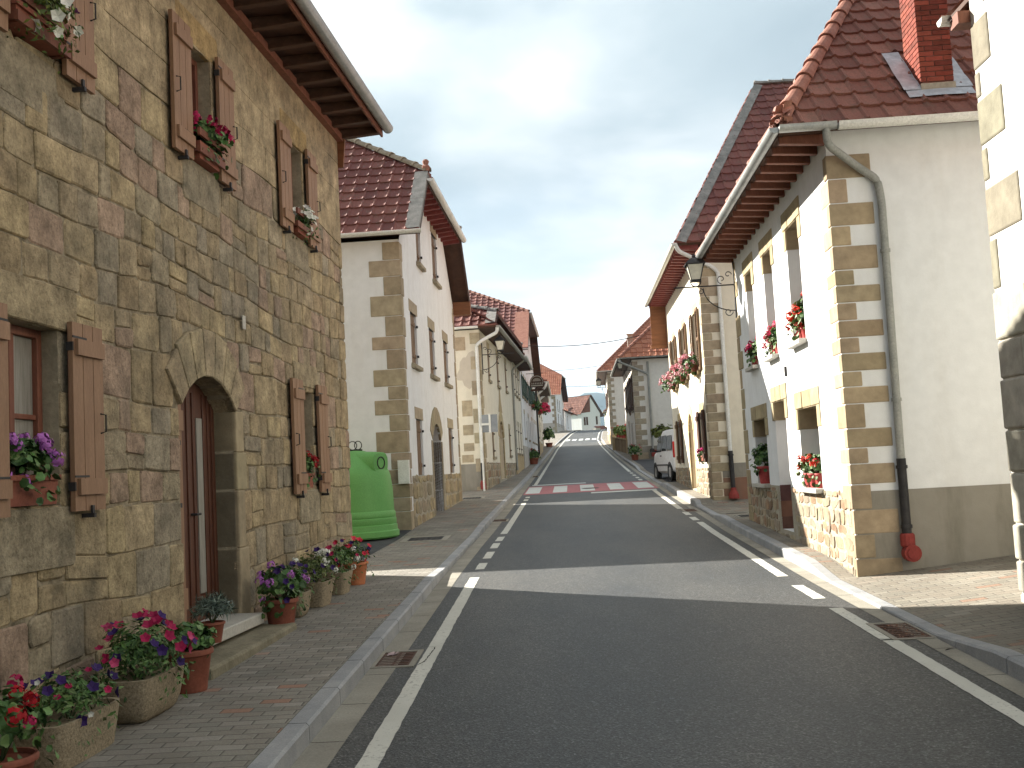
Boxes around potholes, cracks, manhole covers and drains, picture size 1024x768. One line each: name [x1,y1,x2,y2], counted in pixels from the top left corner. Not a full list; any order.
drain grate [370,649,424,669]
drain grate [866,621,937,640]
